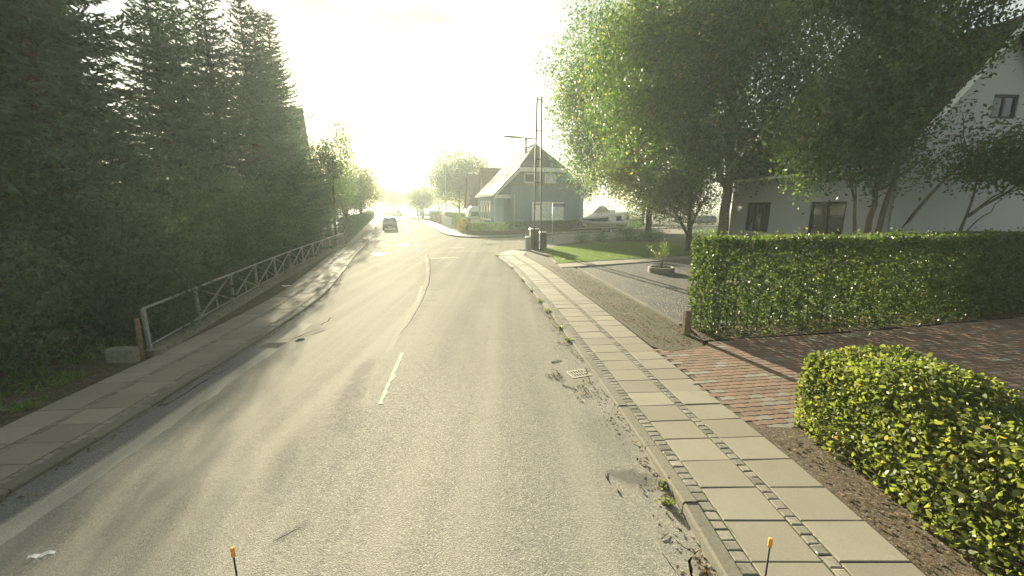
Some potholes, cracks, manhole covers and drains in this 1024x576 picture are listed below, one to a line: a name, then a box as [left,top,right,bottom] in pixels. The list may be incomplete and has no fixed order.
drain grate [565,369,591,378]
crack [664,540,699,576]
